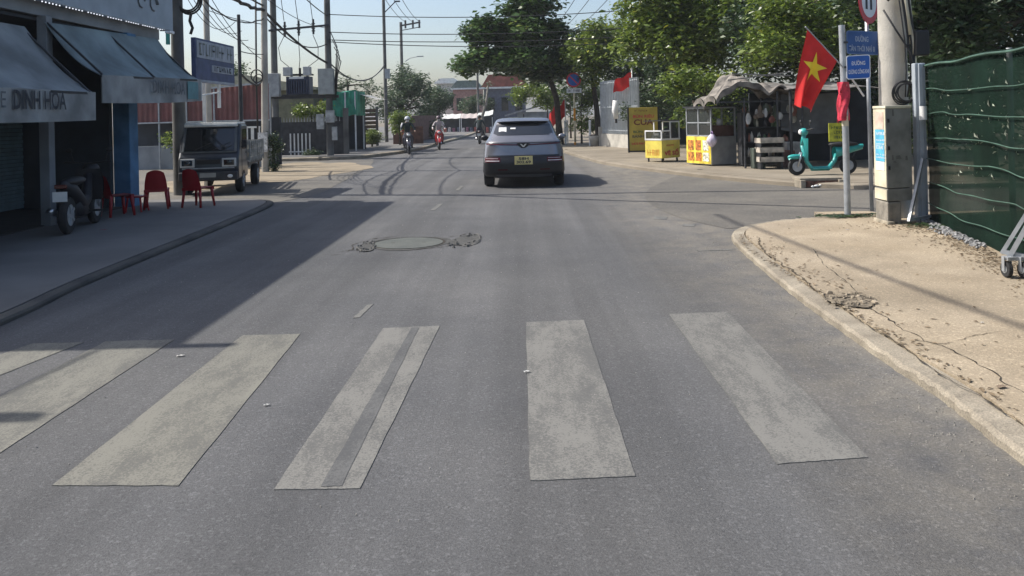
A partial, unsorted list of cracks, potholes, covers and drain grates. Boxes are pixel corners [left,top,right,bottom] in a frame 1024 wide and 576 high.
pothole [820,290,888,309]
manhole cover [368,237,451,250]
